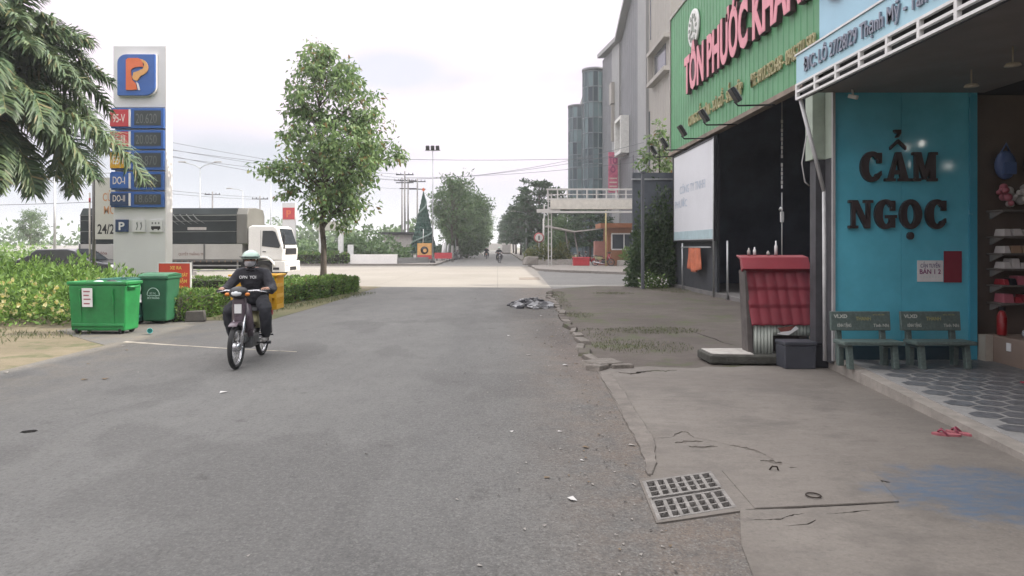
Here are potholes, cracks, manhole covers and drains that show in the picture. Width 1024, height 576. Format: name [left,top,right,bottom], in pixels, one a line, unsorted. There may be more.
drain grate [650,489,736,520]
crack [659,431,794,468]
crack [746,502,899,520]
drain grate [642,471,722,500]
